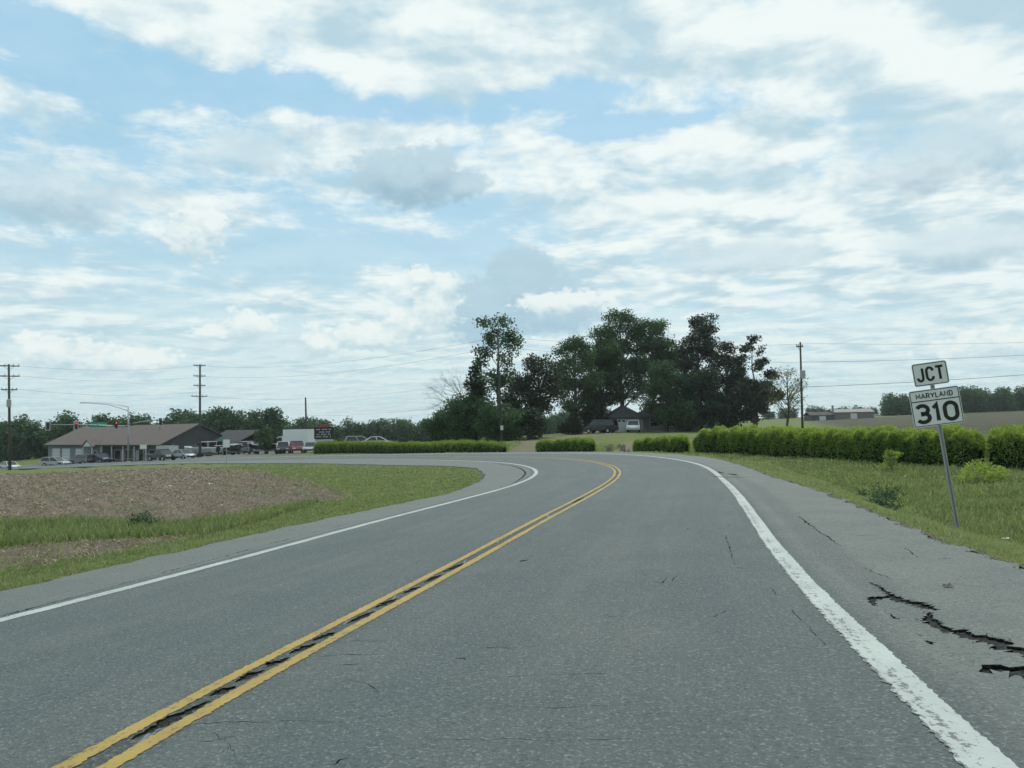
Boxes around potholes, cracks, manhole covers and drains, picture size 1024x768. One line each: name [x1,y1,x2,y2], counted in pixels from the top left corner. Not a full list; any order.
crack [863,568,1024,657]
crack [201,721,273,757]
